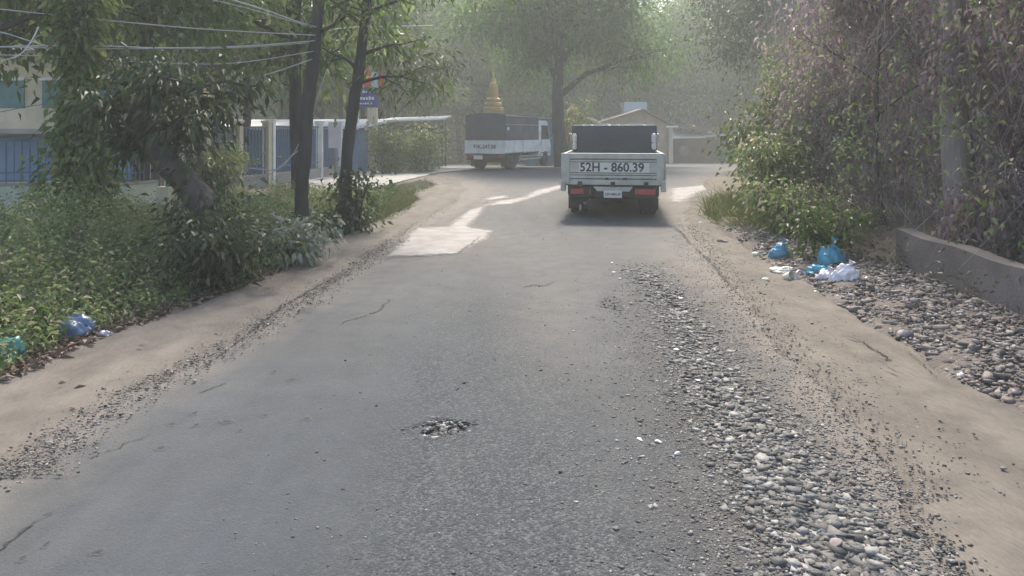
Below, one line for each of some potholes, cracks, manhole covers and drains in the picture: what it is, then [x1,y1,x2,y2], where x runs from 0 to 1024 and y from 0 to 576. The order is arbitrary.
pothole [403,415,486,440]
crack [848,336,937,378]
crack [0,509,58,550]
